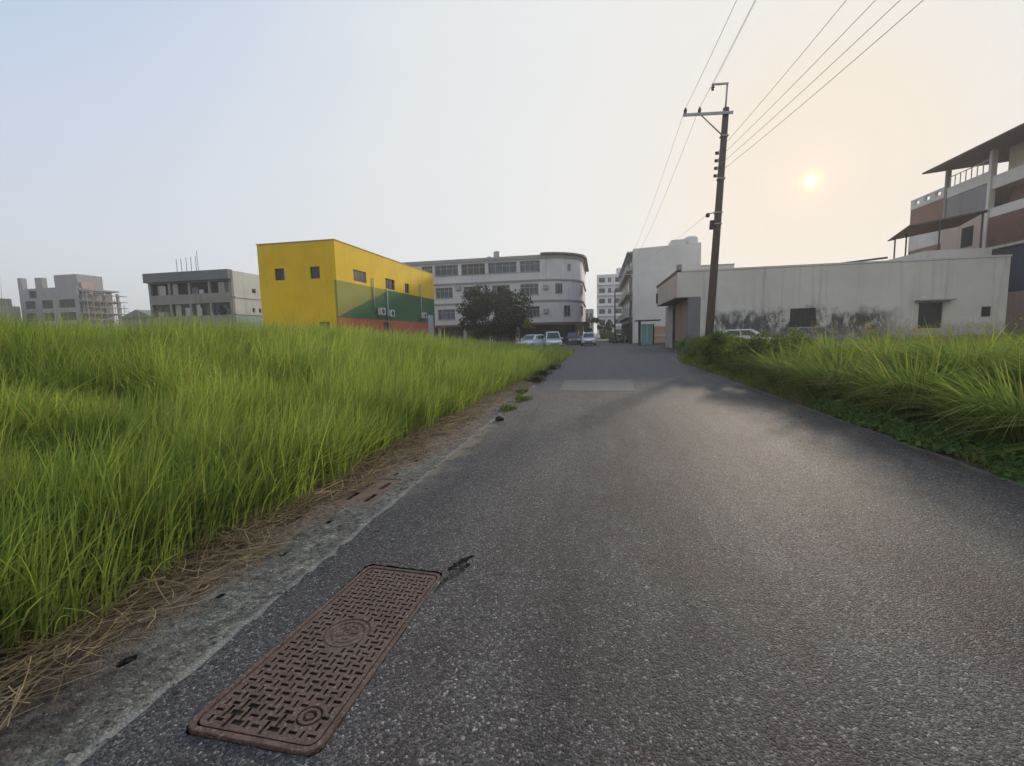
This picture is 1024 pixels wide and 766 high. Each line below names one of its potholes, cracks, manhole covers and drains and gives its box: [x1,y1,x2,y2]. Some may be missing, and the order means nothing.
drain grate [332,479,402,505]
manhole cover [188,566,441,757]
